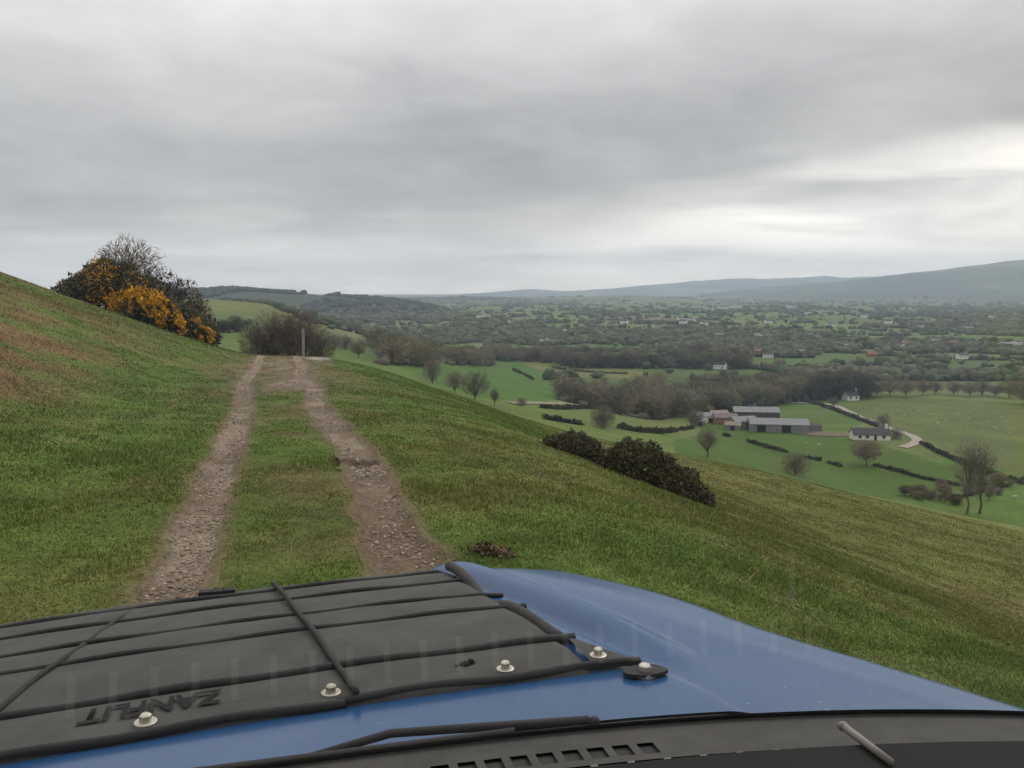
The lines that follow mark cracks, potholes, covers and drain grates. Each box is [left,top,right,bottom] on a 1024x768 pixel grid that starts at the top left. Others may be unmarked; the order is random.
pothole [339,458,380,469]
